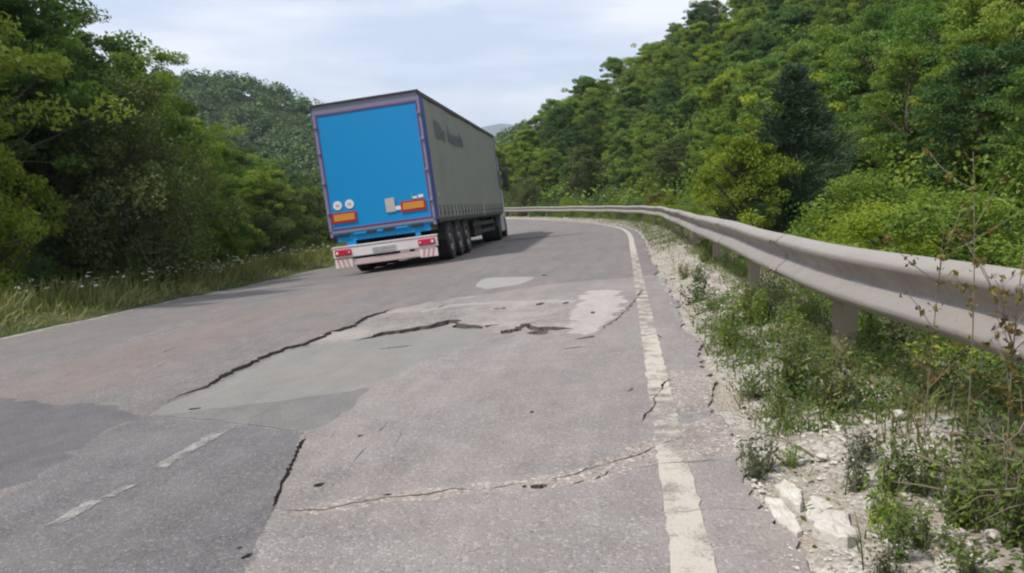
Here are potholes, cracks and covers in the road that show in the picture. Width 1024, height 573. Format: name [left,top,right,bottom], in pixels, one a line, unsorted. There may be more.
crack [148,415,718,511]
crack [357,289,644,349]
crack [627,378,673,421]
